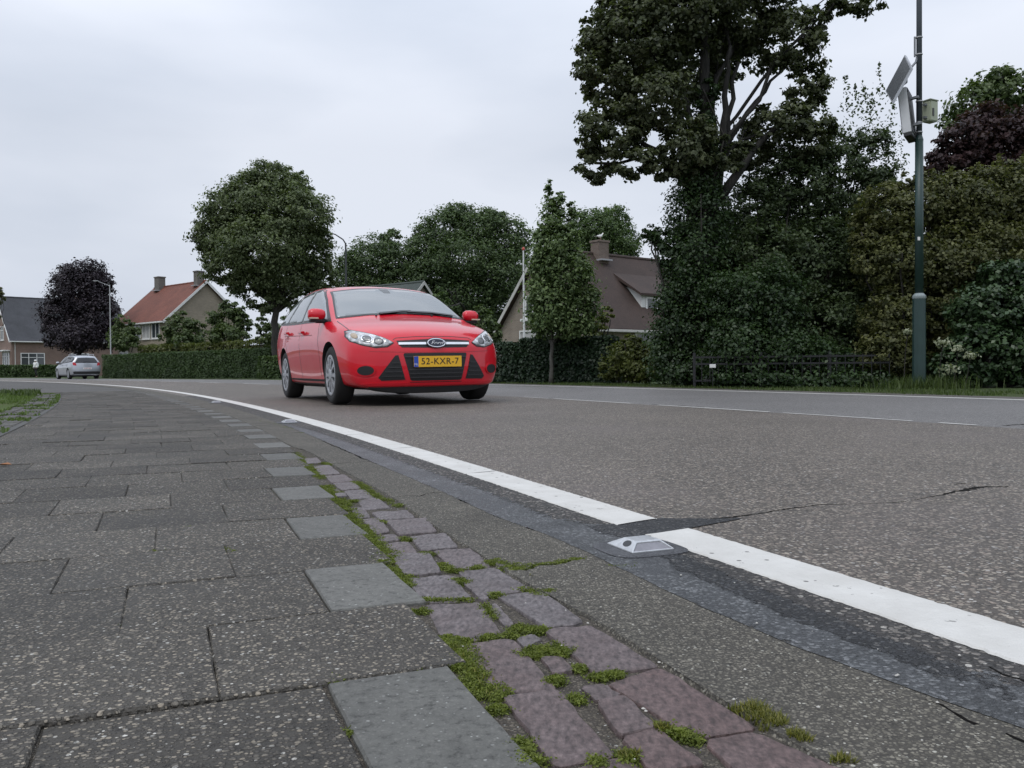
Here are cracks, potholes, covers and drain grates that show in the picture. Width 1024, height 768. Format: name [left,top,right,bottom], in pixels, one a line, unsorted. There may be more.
crack [927,700,1024,743]
crack [710,483,1008,519]
crack [990,667,1024,682]
